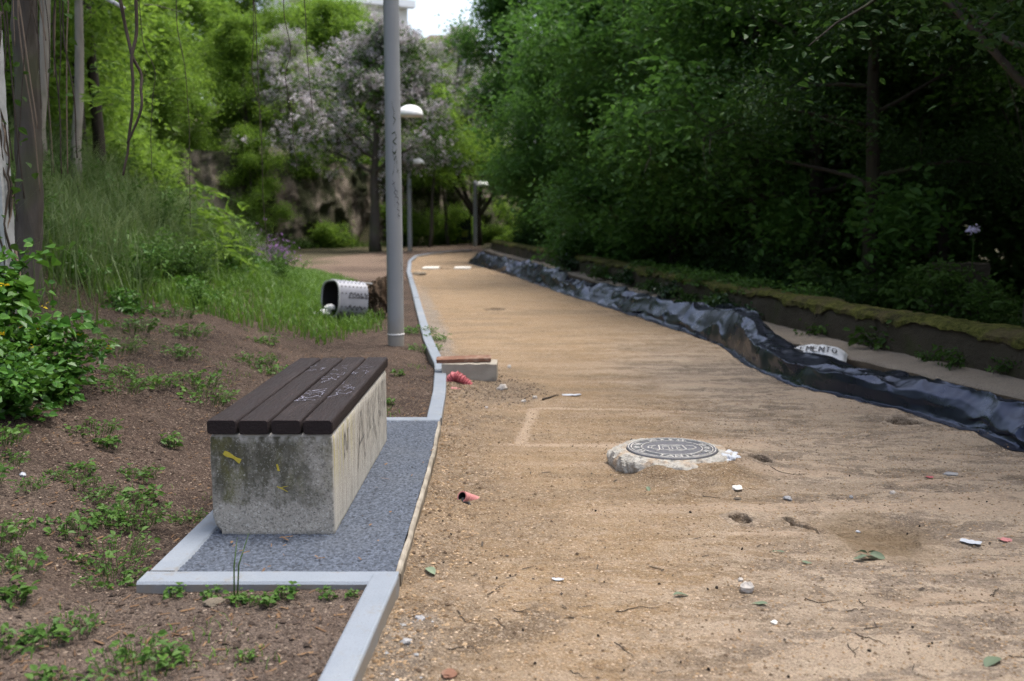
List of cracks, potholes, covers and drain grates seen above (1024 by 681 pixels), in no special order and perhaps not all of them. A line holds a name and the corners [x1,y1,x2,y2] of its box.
pothole [879,415,929,427]
pothole [719,509,762,527]
pothole [814,515,933,560]
manhole cover [607,438,741,473]
